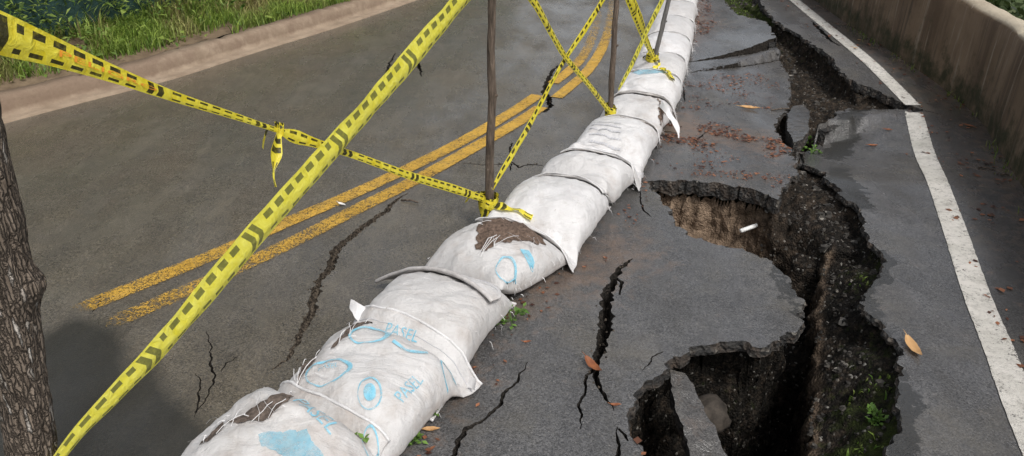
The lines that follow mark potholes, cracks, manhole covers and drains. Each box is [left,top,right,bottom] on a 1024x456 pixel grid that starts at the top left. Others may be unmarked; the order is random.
crack [541,66,557,112]
pothole [640,180,782,372]
crack [194,332,240,417]
pothole [617,323,816,456]
crack [370,53,423,91]
crack [682,0,938,456]
crack [272,194,407,370]
crack [451,363,527,456]
crack [577,259,663,456]
